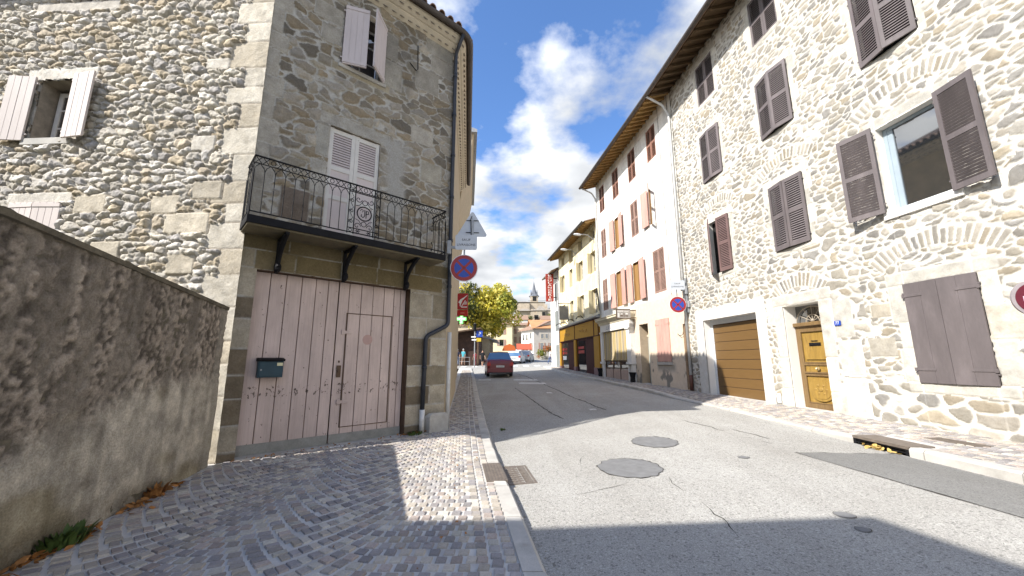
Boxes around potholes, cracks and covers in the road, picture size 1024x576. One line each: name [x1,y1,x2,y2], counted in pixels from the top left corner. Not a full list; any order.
drain grate [852,435,935,457]
drain grate [482,463,538,486]
